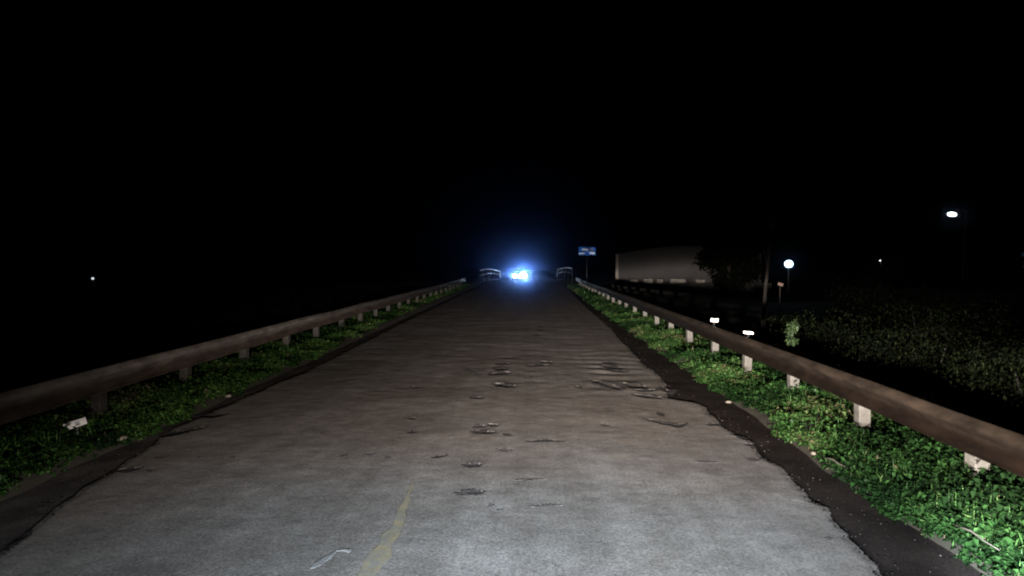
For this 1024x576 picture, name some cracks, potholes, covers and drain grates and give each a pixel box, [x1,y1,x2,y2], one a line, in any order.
pothole [453,488,486,496]
pothole [590,380,627,390]
